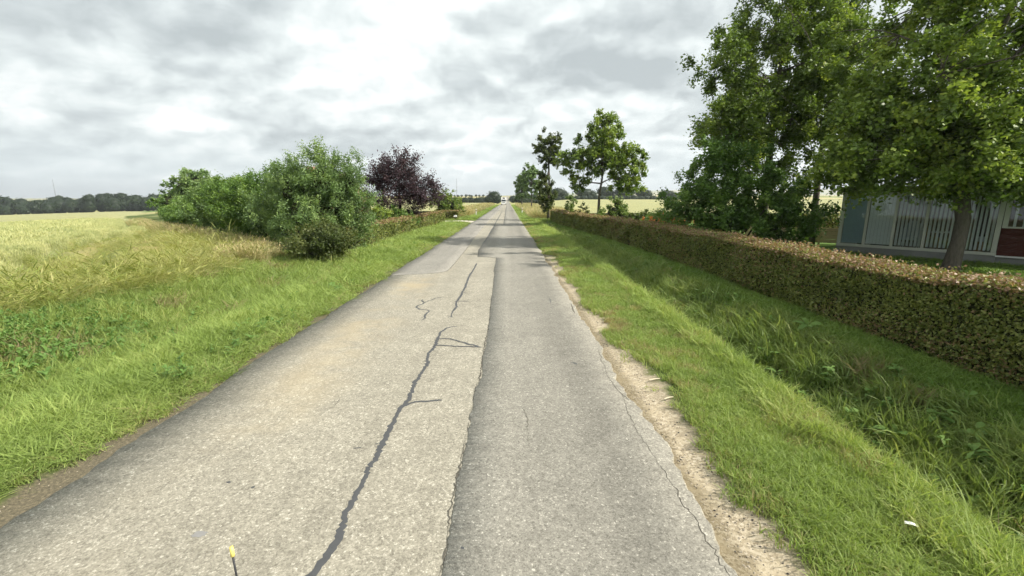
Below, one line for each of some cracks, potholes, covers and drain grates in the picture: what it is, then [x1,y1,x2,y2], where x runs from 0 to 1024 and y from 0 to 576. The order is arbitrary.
crack [599,352,729,574]
